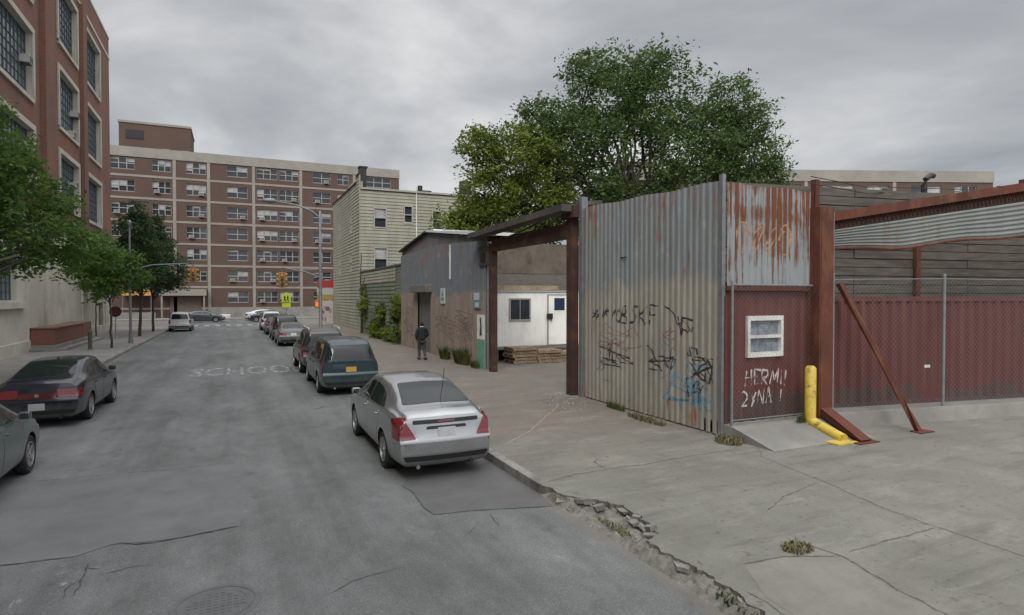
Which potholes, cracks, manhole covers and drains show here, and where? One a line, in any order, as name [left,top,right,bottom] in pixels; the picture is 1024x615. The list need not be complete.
manhole cover [168,584,261,615]
crack [64,565,140,597]
crack [116,526,234,544]
crack [744,527,949,615]
